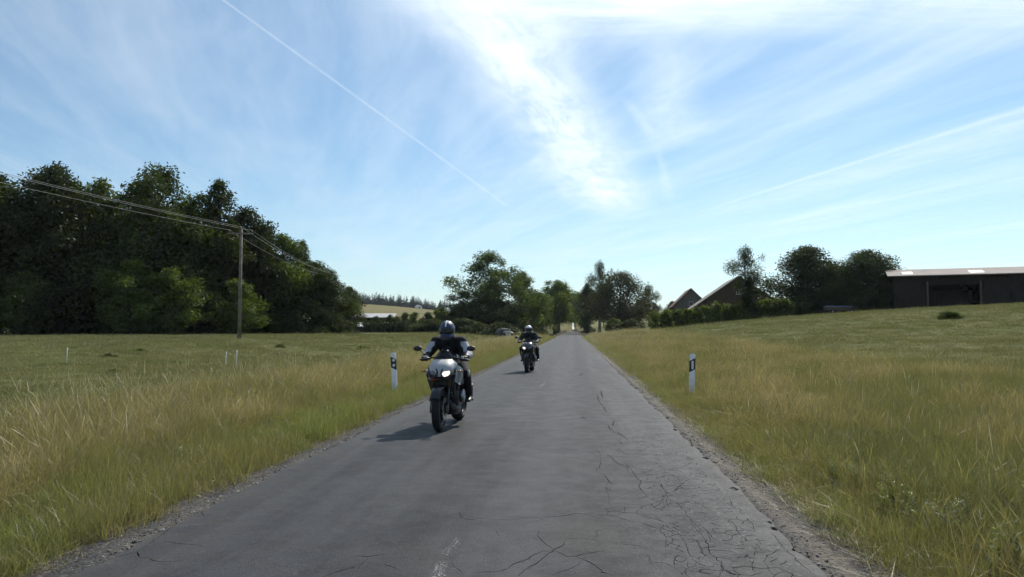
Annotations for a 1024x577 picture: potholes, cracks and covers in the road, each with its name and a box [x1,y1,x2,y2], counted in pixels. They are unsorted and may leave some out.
crack [76,489,247,574]
crack [451,391,811,577]
